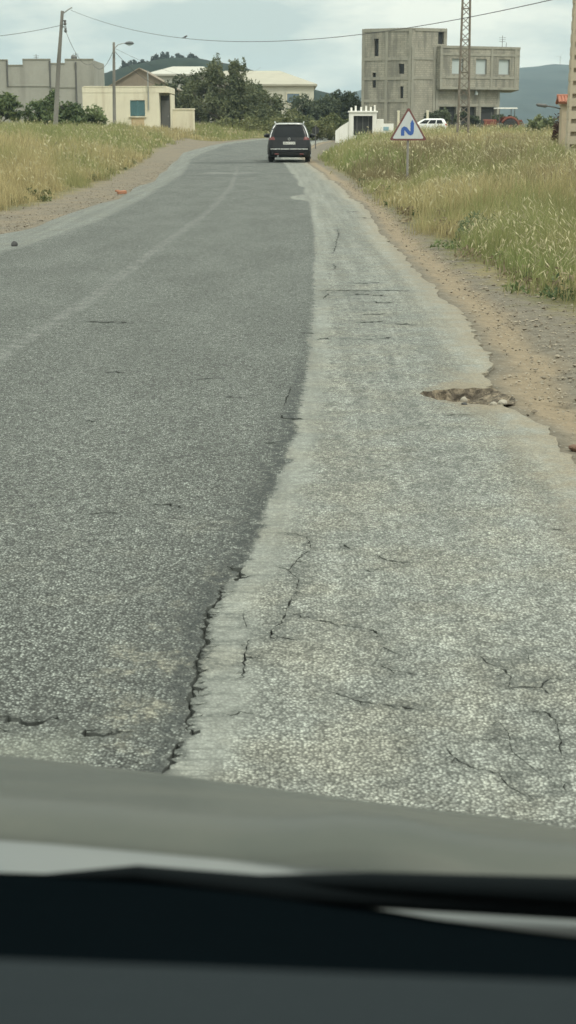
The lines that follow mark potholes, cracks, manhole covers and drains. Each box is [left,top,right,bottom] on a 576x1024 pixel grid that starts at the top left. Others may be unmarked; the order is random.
crack [0,715,59,732]
crack [336,693,427,711]
pothole [420,388,515,406]
crack [445,720,568,800]
crack [162,533,413,774]
crack [532,711,572,760]
crack [323,282,409,340]
crack [480,648,568,694]
crack [81,729,133,737]
